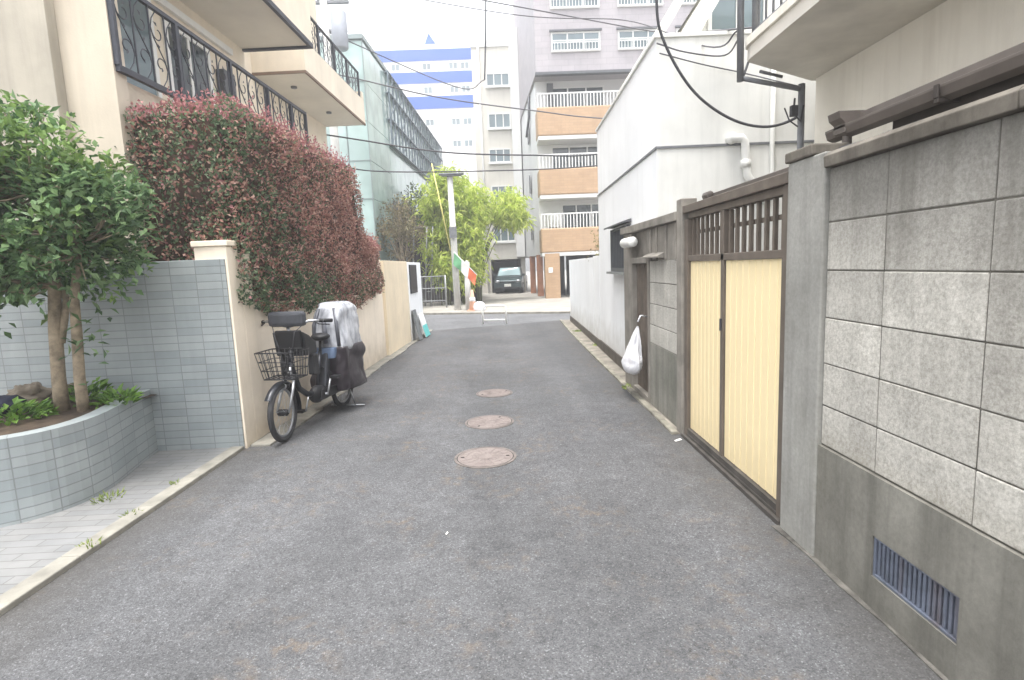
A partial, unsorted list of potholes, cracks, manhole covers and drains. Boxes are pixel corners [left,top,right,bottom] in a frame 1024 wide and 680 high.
manhole cover [454,447,516,469]
manhole cover [476,389,513,398]
manhole cover [465,415,514,429]
